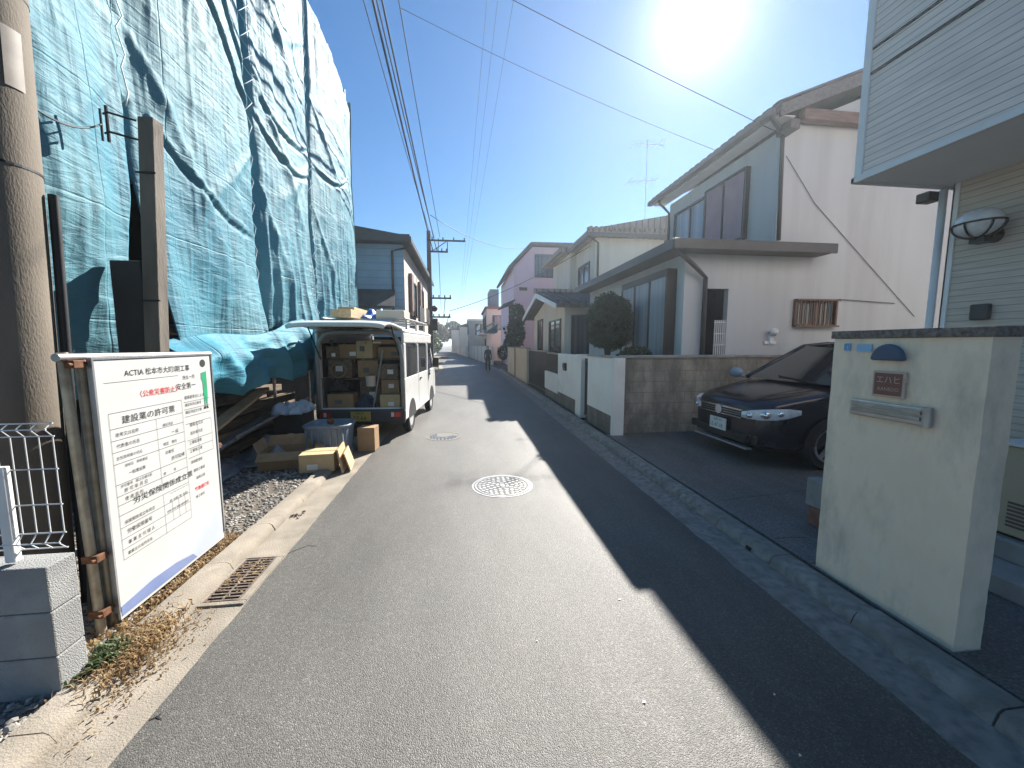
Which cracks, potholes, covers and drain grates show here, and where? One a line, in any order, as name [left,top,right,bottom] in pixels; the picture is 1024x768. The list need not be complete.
manhole cover [472,475,533,498]
manhole cover [426,432,461,441]
drain grate [196,554,285,609]
